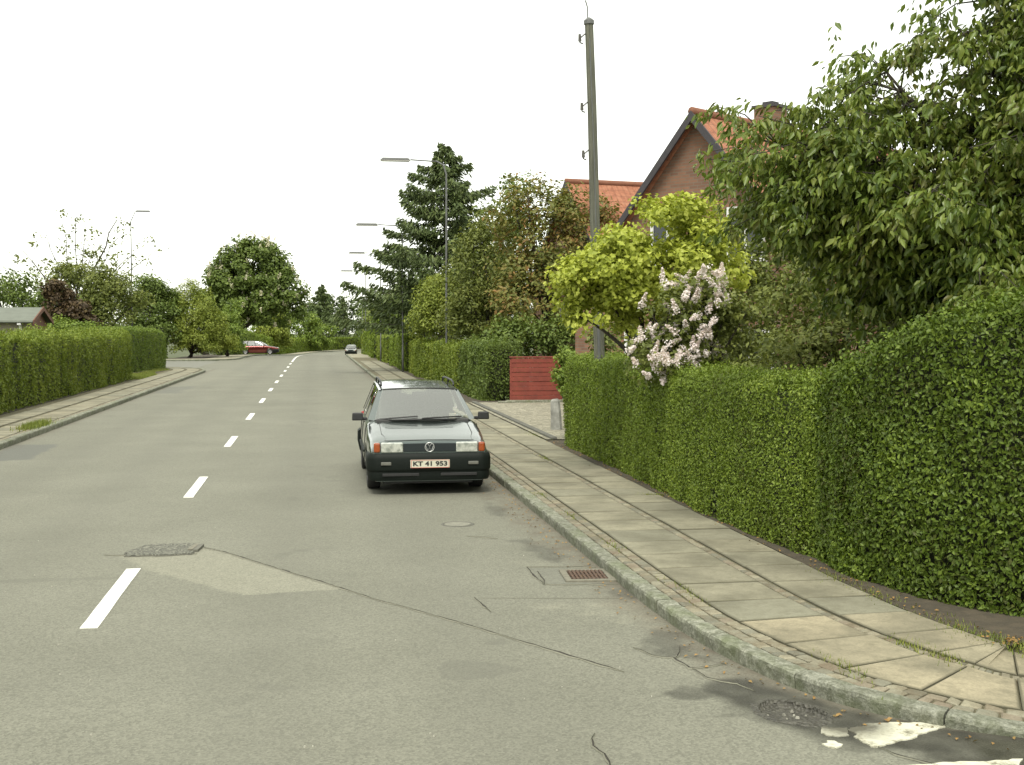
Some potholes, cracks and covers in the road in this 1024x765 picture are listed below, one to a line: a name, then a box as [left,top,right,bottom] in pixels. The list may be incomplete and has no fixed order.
crack [591,733,611,765]
drain grate [559,568,617,582]
crack [108,536,754,691]
pothole [750,698,836,728]
